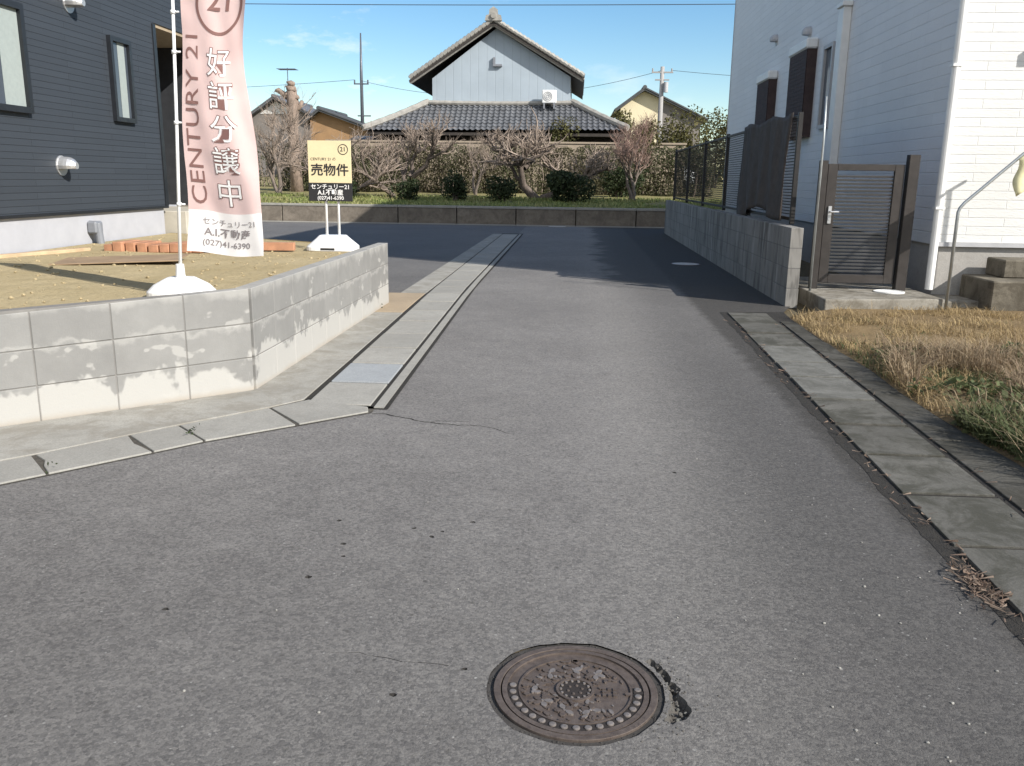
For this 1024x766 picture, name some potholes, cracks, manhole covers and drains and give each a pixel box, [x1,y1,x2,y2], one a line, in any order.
crack [332,652,449,666]
manhole cover [486,643,665,746]
crack [378,413,509,434]
